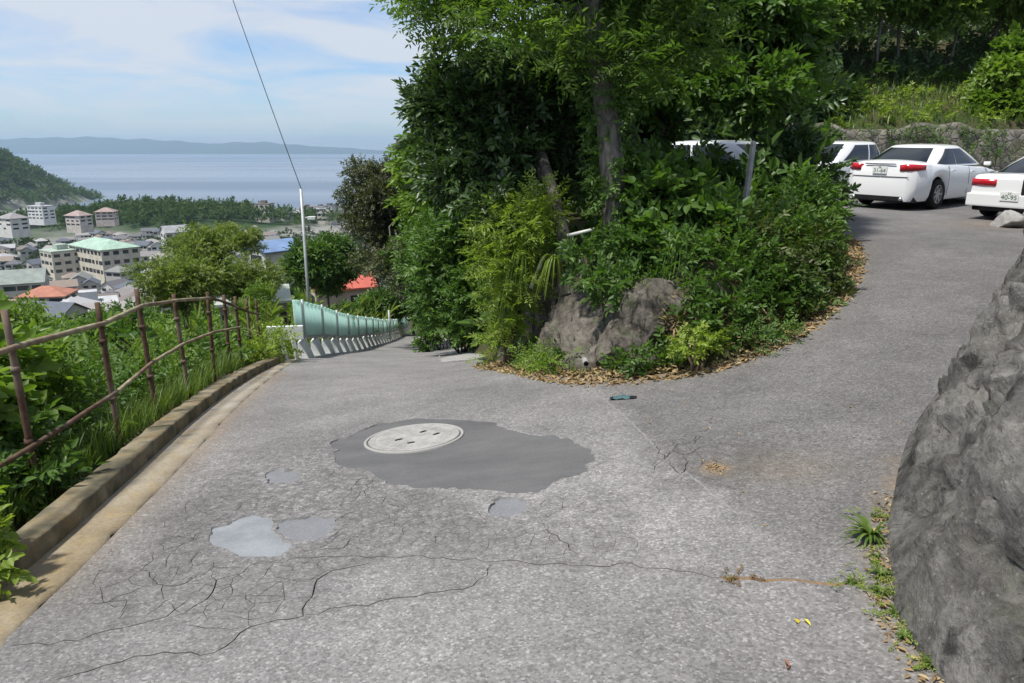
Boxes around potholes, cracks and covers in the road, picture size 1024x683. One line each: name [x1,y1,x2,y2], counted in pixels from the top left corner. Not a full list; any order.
crack [646,431,769,538]
manhole cover [364,423,464,454]
crack [13,472,864,679]
